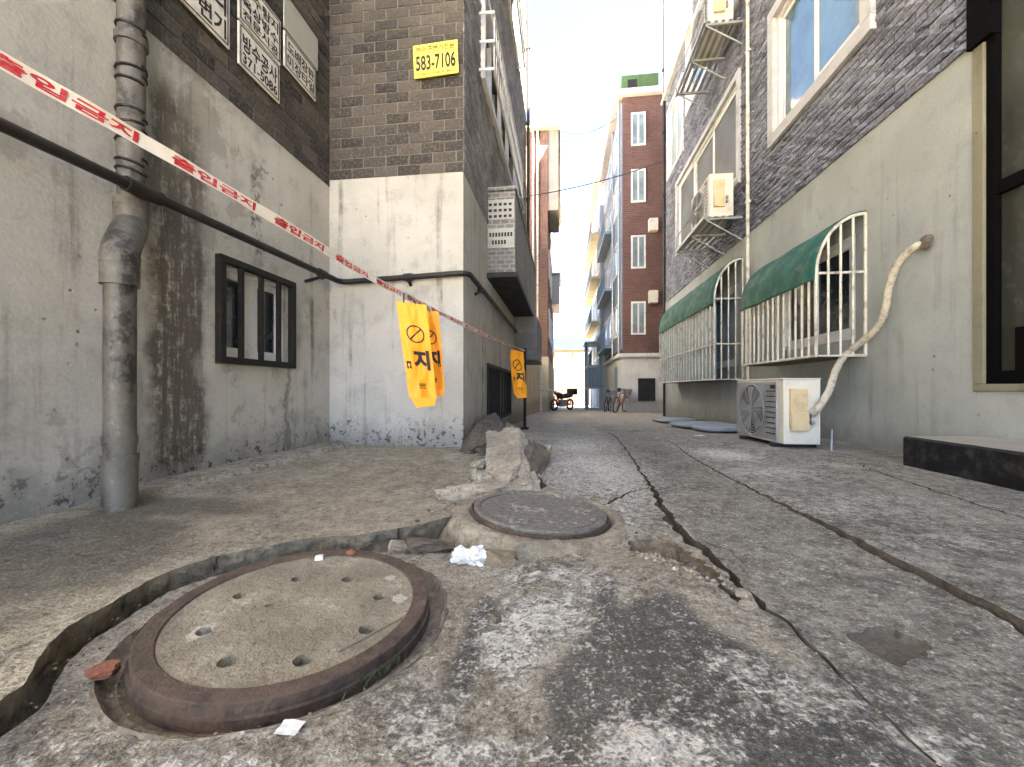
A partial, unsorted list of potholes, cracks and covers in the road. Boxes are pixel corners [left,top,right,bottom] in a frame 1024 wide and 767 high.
crack [838,462,1024,518]
manhole cover [89,550,449,742]
manhole cover [445,490,628,559]
crack [592,426,942,767]
pothole [627,539,741,603]
